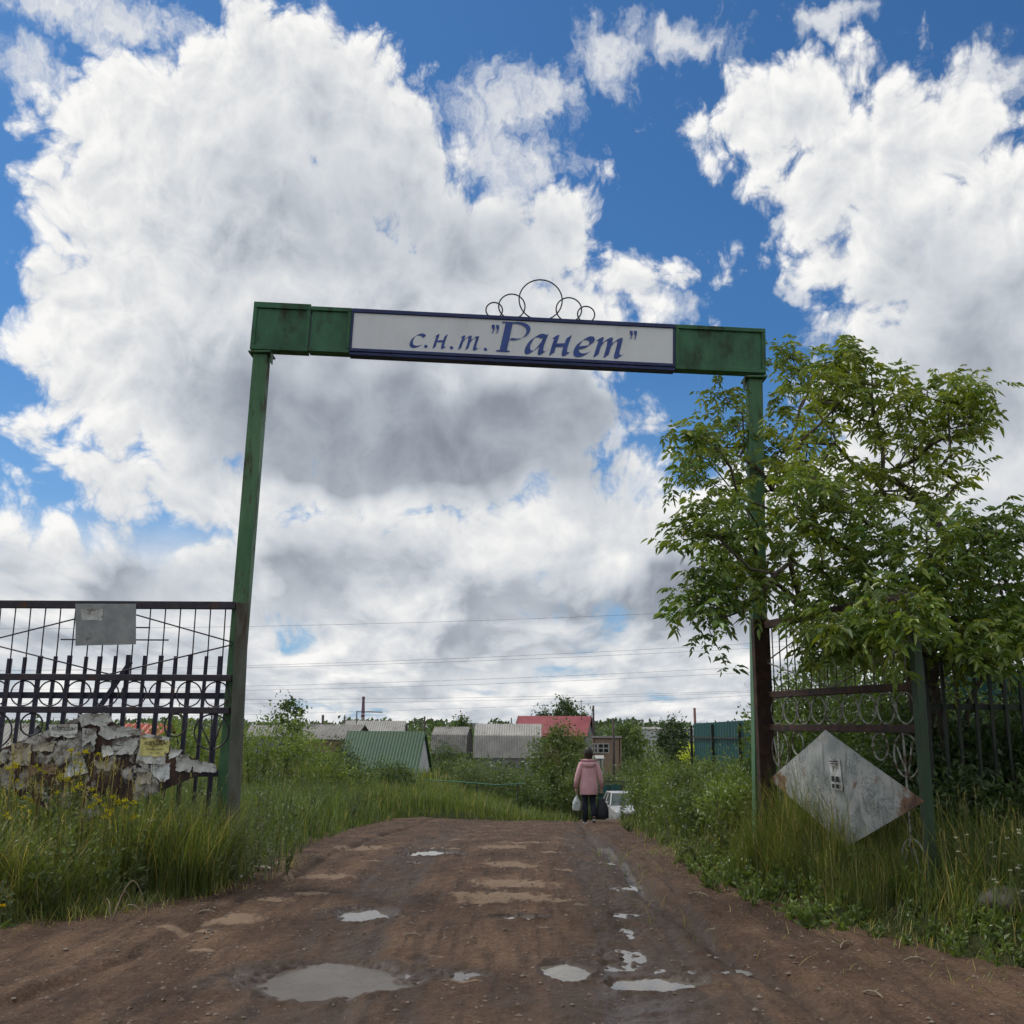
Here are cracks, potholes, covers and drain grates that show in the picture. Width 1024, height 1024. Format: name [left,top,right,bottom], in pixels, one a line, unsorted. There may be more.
pothole [324,904,404,923]
pothole [533,956,600,985]
pothole [600,972,729,994]
pothole [190,956,454,1007]
pothole [393,849,470,857]
